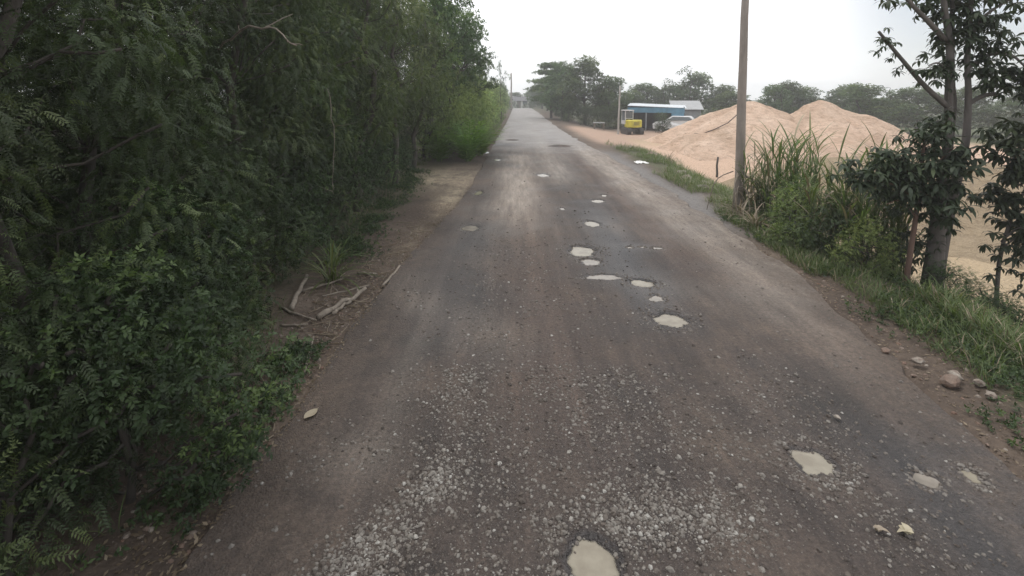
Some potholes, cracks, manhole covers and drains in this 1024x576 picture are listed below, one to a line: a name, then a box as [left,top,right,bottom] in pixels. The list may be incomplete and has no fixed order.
pothole [642,308,697,332]
pothole [456,223,487,232]
pothole [576,272,638,281]
pothole [950,461,997,490]
pothole [904,463,952,497]
pothole [645,293,670,303]
pothole [550,521,635,576]
pothole [563,243,601,259]
pothole [776,436,854,481]
pothole [624,276,664,290]
pothole [574,256,608,267]
pothole [581,219,605,228]
